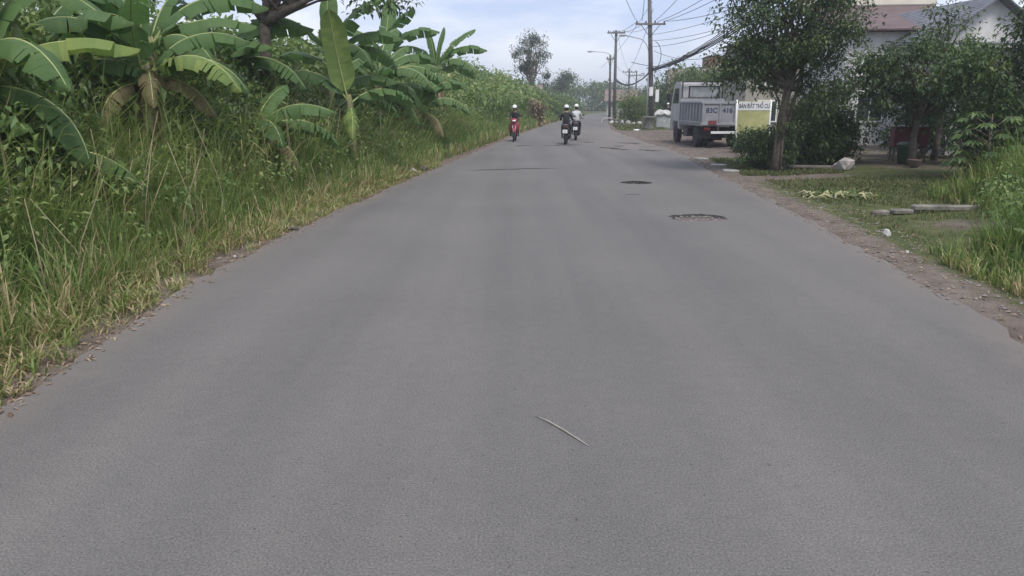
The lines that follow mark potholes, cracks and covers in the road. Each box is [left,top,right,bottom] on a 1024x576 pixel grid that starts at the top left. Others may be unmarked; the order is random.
pothole [668,214,728,222]
